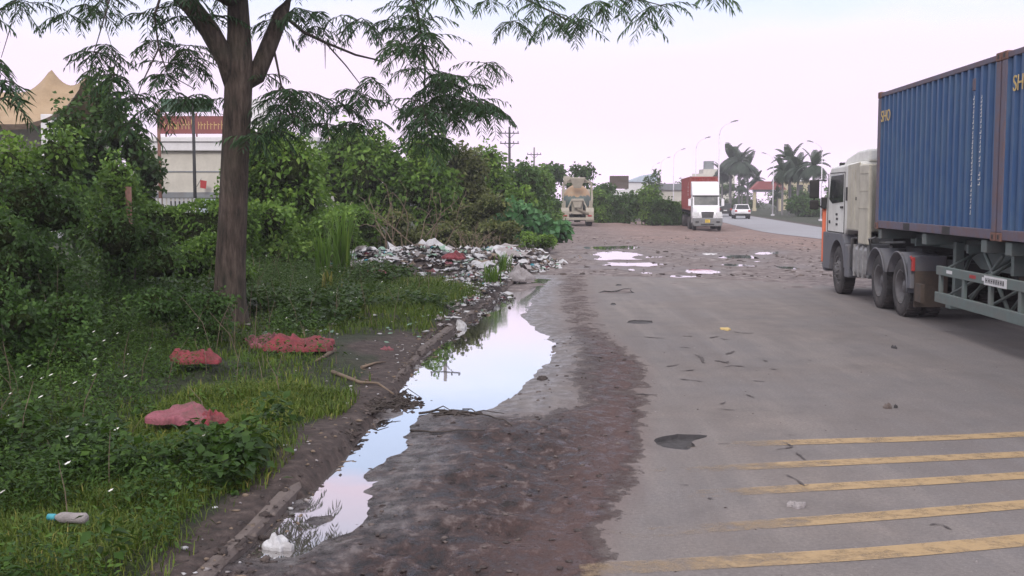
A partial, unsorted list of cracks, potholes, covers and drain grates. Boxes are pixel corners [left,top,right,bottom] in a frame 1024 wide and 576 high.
pothole [654,434,707,450]
